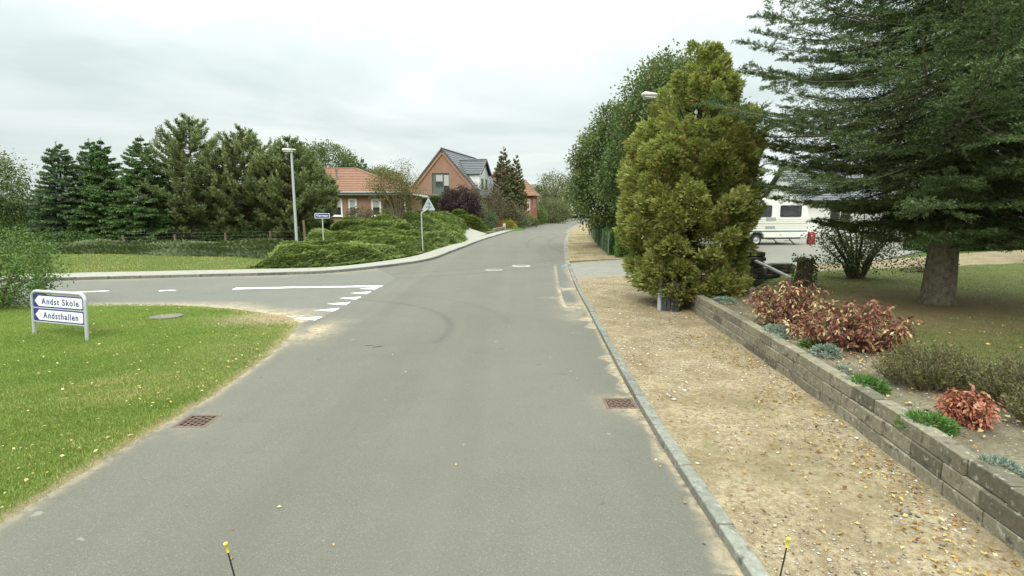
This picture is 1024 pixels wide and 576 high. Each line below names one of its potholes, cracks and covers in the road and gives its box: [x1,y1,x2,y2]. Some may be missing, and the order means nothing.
drain grate [602,398,638,409]
drain grate [170,415,222,428]
